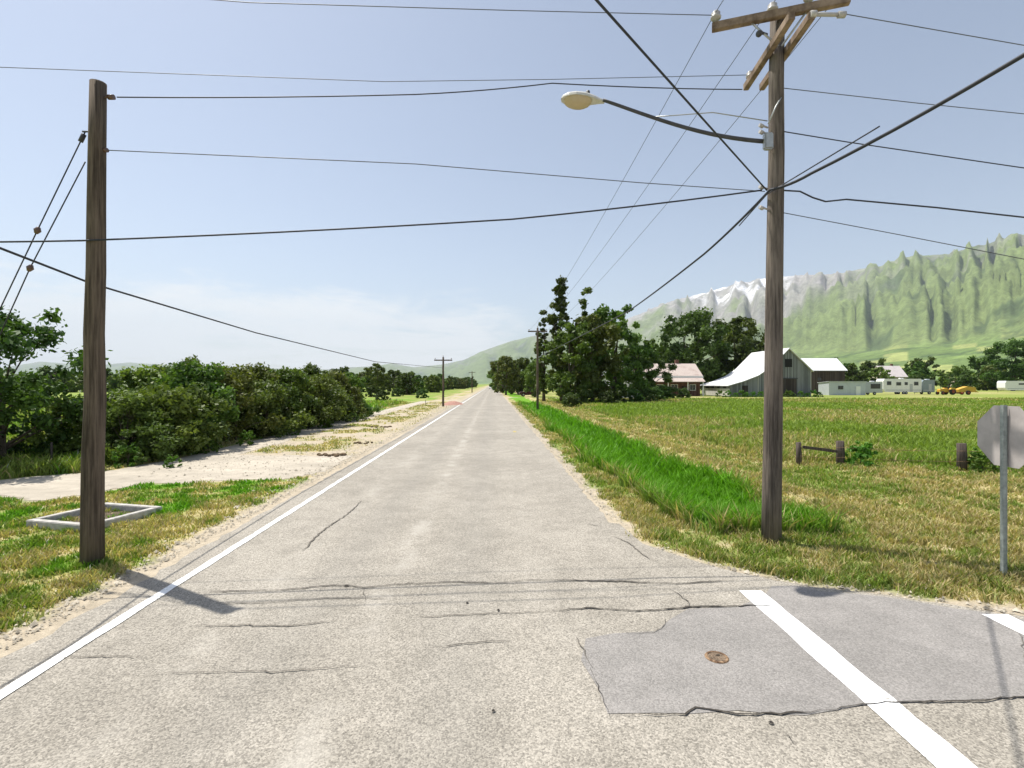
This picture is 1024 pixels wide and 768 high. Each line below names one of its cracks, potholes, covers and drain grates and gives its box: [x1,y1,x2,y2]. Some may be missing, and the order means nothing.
crack [303,501,361,550]
crack [152,664,363,673]
crack [206,579,772,633]
manhole cover [704,651,729,664]
